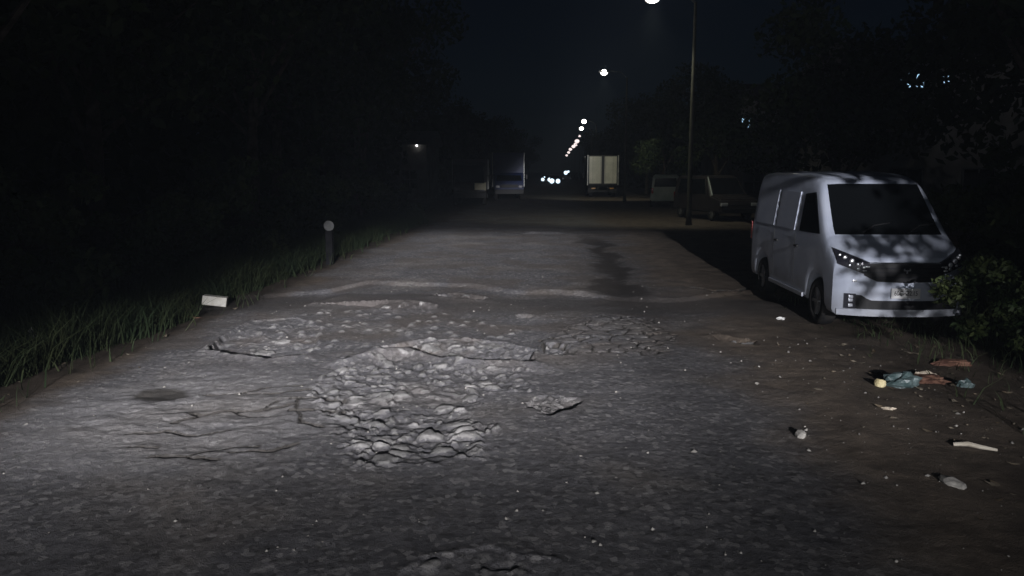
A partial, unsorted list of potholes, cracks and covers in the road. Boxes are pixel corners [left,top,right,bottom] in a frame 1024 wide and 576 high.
crack [538,315,676,356]
pothole [347,337,536,361]
crack [125,385,325,461]
pothole [300,347,536,474]
